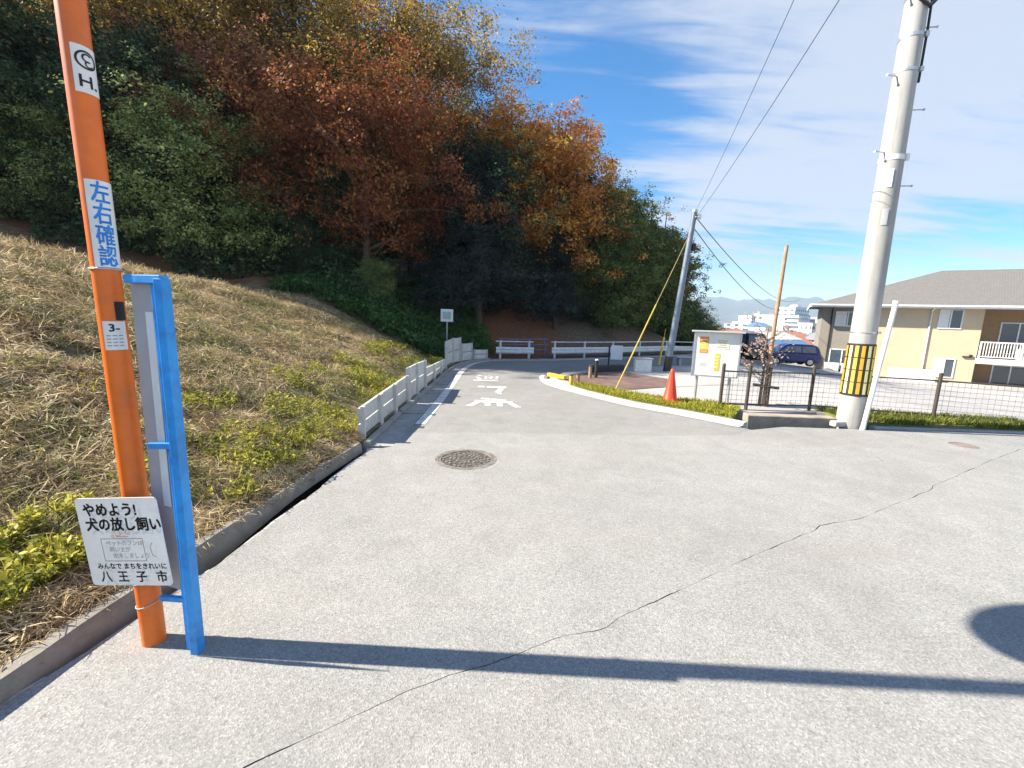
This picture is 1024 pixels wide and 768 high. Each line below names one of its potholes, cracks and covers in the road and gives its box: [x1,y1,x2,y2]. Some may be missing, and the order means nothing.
crack [243,449,1020,768]
manhole cover [435,449,497,470]
